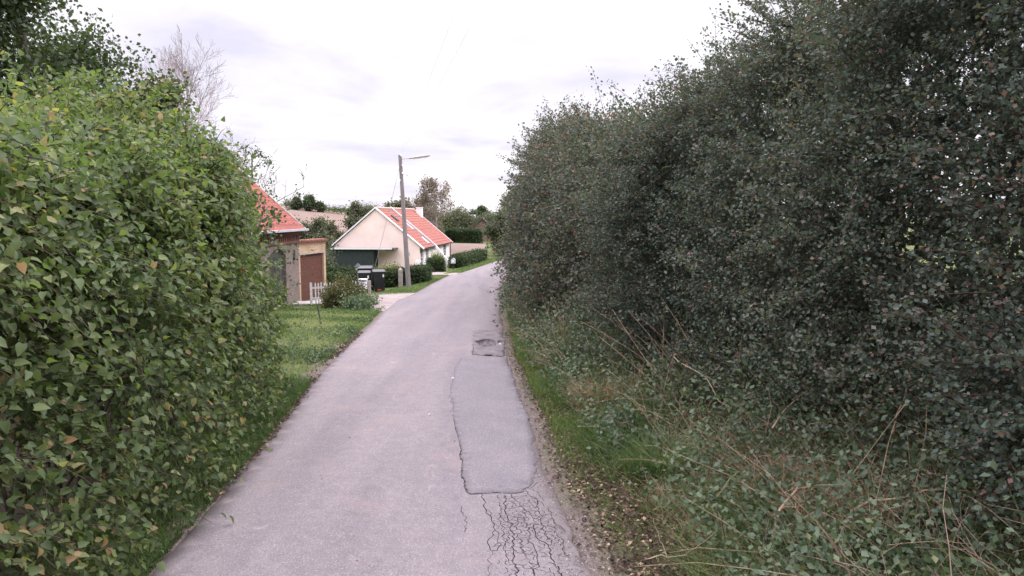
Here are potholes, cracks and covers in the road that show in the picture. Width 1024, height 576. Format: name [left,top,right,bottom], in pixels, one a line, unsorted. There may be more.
crack [481,482,584,576]
pothole [475,339,496,347]
